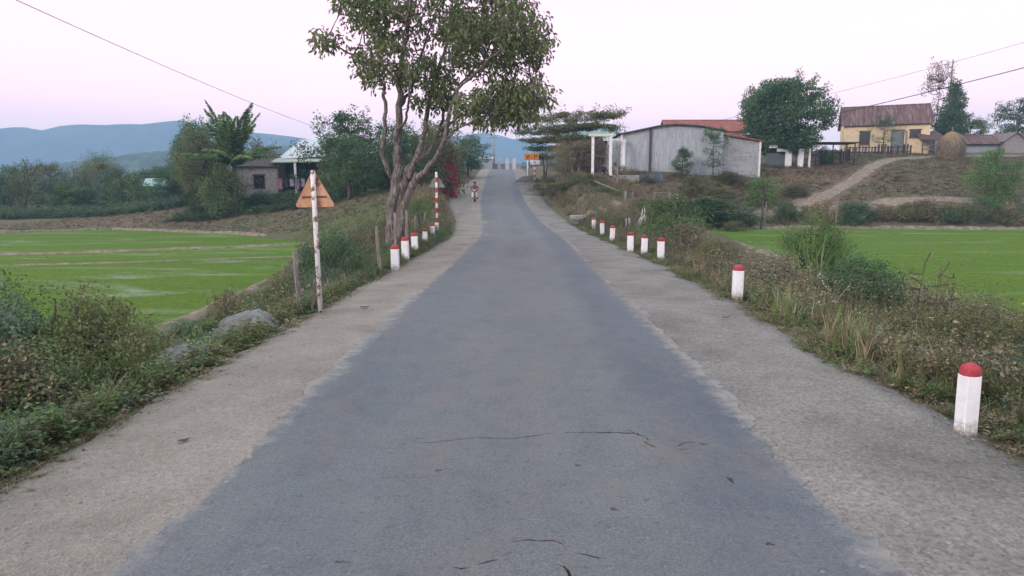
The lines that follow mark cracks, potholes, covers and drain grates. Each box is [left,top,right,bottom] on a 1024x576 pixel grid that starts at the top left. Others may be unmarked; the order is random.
crack [455,539,604,576]
crack [427,430,657,448]
